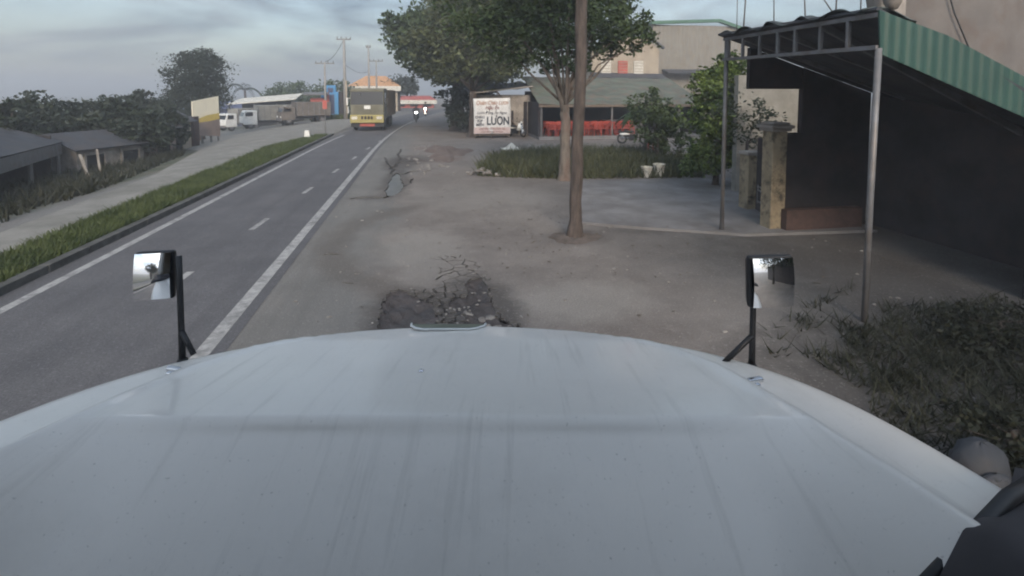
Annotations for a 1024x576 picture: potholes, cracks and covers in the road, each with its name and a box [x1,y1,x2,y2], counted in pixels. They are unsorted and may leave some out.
pothole [385,173,404,197]
pothole [378,288,439,330]
pothole [448,276,515,327]
crack [376,255,523,329]
